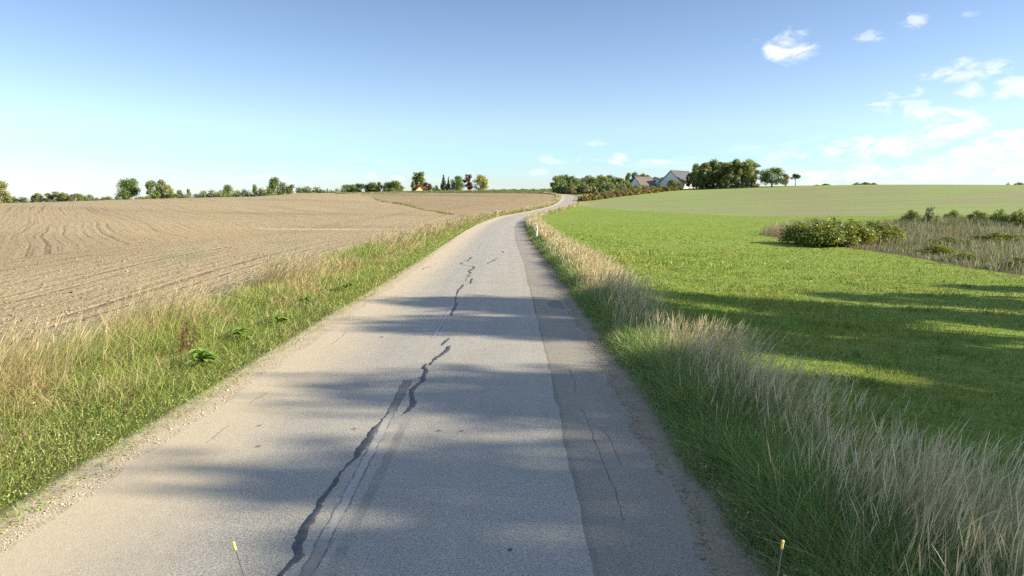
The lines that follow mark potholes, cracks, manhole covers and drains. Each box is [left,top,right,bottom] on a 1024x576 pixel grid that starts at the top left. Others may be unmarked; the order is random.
crack [579,408,623,518]
